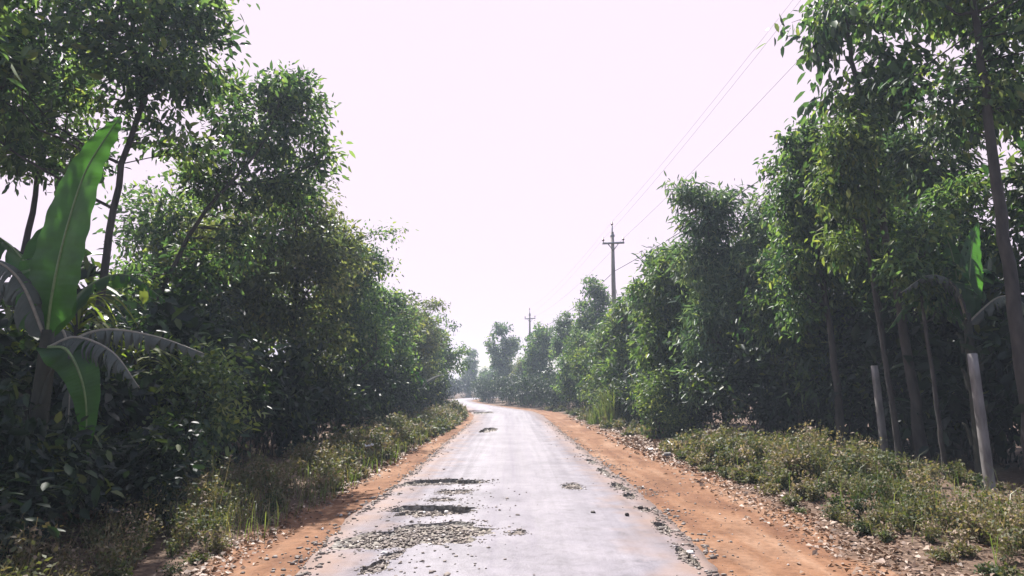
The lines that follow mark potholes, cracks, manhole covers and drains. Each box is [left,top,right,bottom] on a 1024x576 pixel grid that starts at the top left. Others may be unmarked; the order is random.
pothole [331,521,497,550]
pothole [382,551,404,562]
pothole [360,559,389,575]
pothole [387,505,477,517]
